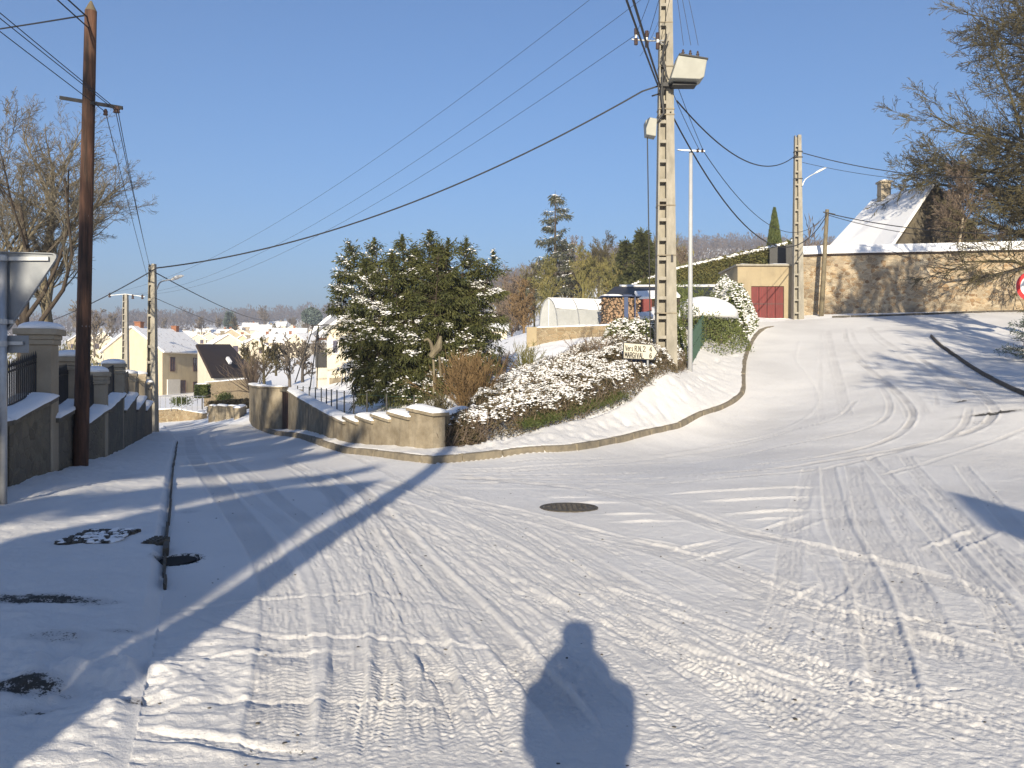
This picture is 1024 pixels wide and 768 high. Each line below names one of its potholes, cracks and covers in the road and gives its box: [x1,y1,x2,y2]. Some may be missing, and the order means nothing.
manhole cover [540,502,598,513]
drain grate [141,536,197,566]
